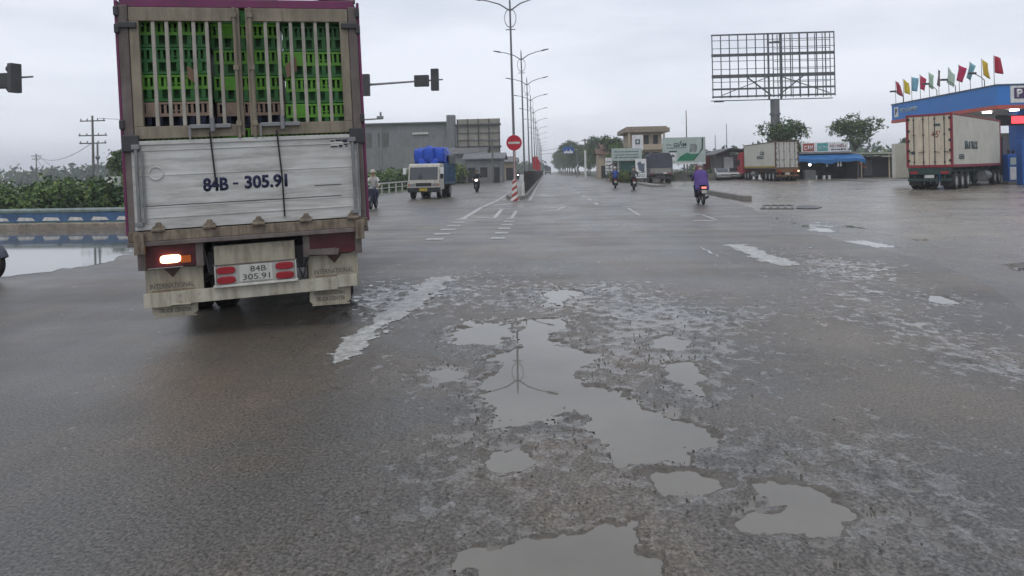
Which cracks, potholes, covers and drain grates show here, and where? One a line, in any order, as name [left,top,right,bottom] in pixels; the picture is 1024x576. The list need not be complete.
pothole [719,476,864,539]
pothole [542,288,586,306]
pothole [427,367,467,383]
pothole [447,319,520,346]
pothole [471,317,725,469]
pothole [635,464,740,499]
pothole [474,445,536,478]
pothole [1000,262,1024,272]
pothole [440,515,673,576]
